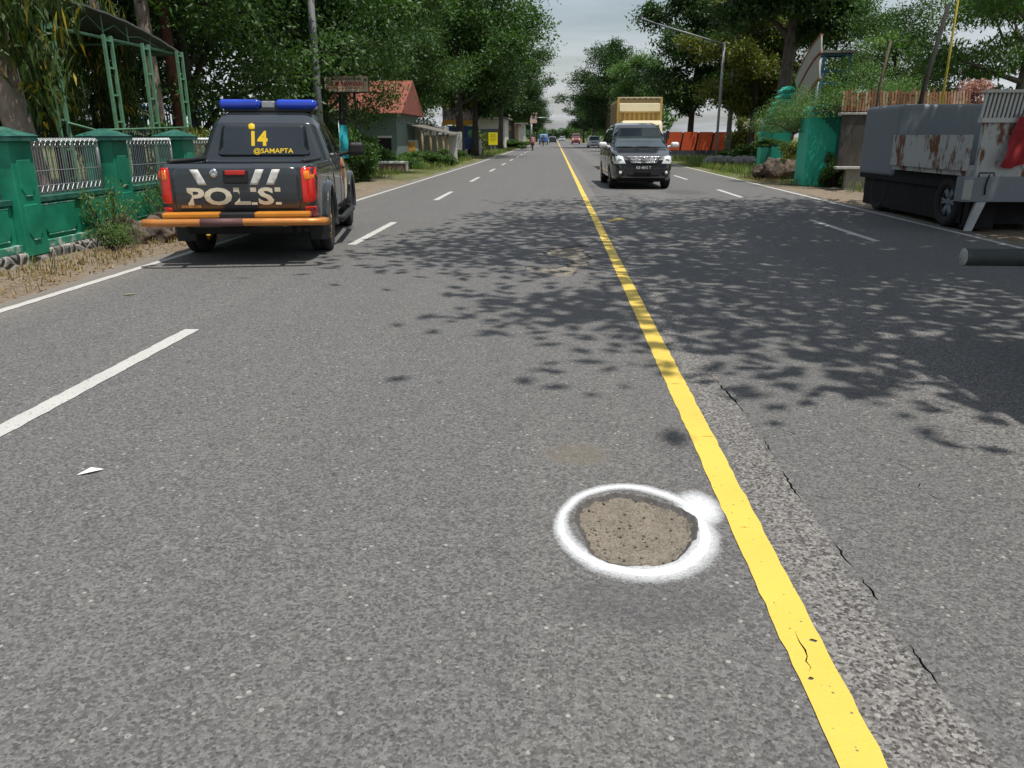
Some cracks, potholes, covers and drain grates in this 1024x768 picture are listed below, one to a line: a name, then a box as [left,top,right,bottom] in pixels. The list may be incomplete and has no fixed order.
crack [714,378,938,684]
pothole [574,493,697,566]
